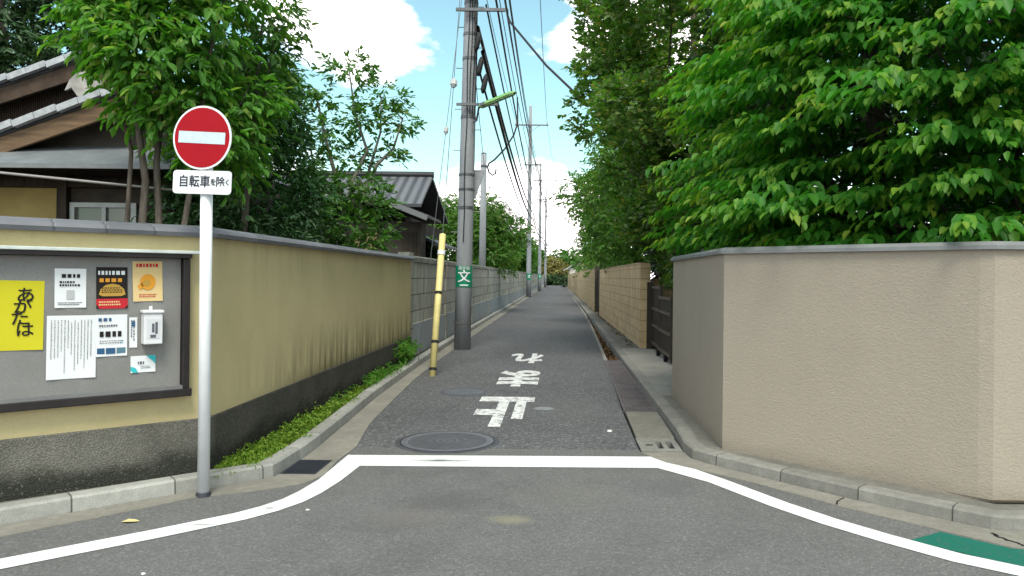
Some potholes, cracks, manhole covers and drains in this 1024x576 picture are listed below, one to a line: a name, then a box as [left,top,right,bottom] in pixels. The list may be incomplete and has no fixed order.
drain grate [635,438,683,452]
drain grate [280,460,332,474]
manhole cover [395,431,500,454]
drain grate [604,360,657,414]
